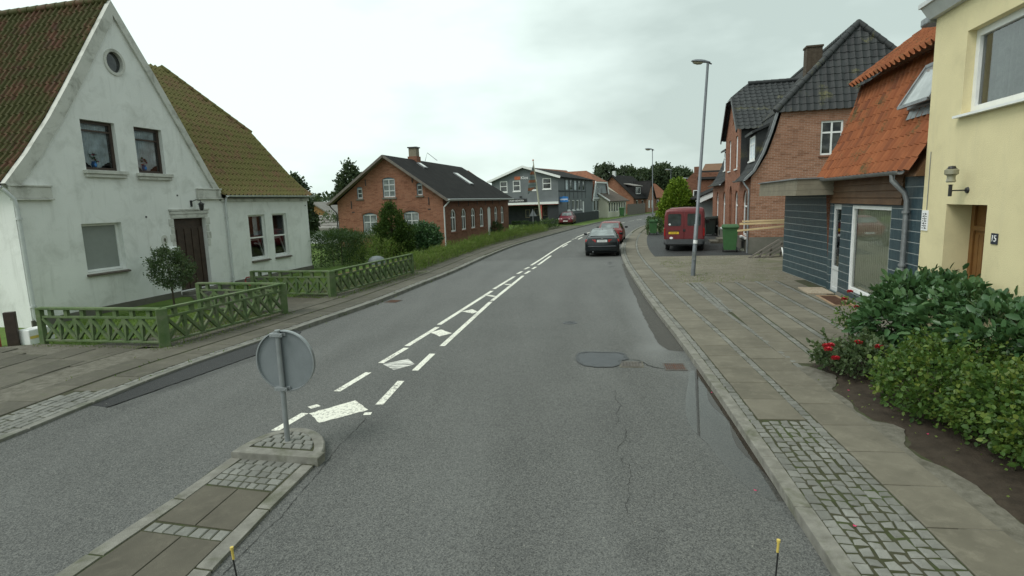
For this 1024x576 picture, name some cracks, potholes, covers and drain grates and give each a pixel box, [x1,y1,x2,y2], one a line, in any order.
crack [615,393,632,515]
drain grate [662,363,688,371]
